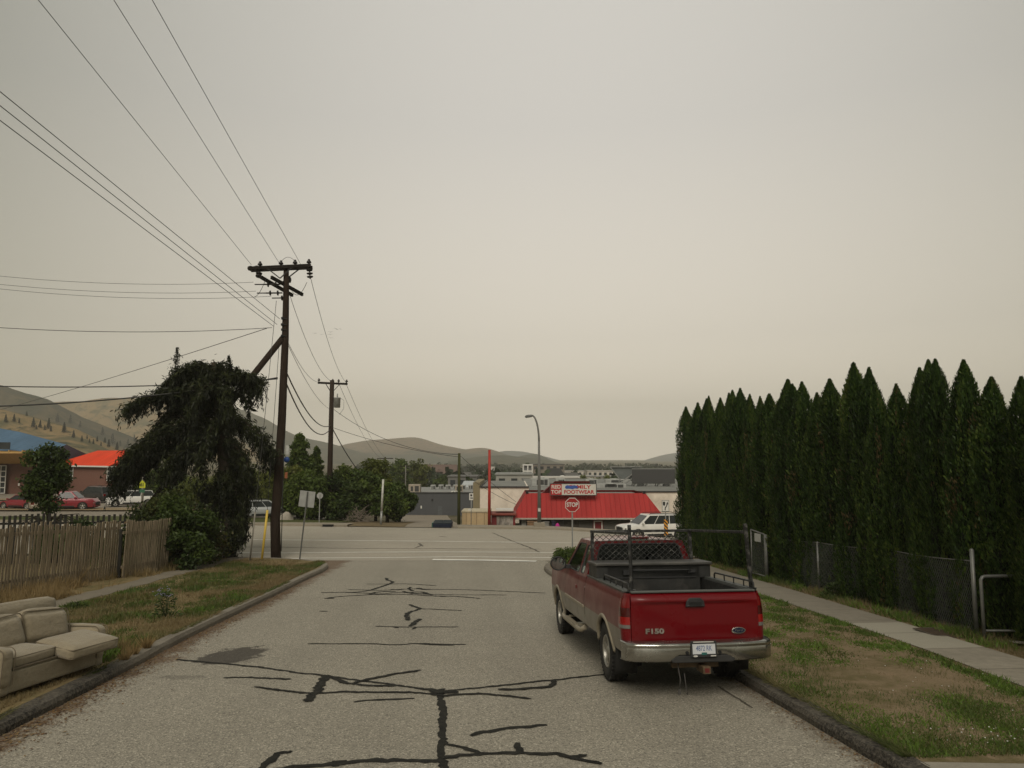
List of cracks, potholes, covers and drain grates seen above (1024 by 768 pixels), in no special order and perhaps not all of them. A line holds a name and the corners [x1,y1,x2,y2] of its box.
crack [321,578,538,598]
crack [308,619,466,645]
crack [718,686,753,708]
